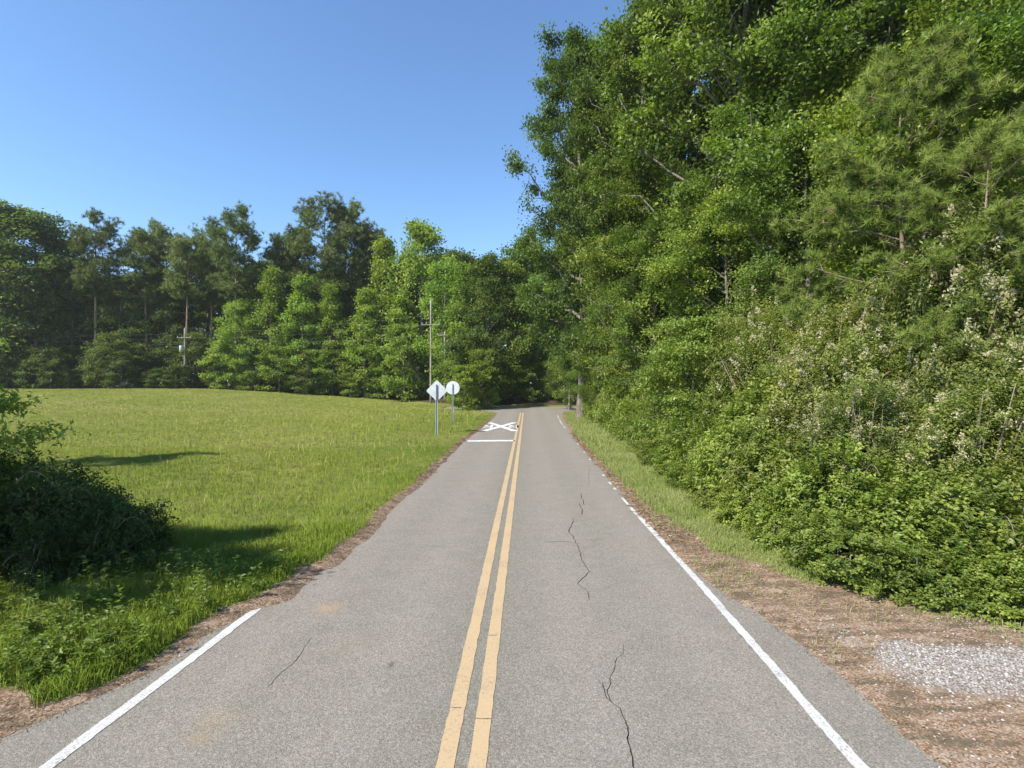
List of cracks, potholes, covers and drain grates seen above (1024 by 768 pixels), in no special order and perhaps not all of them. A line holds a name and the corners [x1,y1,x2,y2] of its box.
crack [602,645,635,768]
crack [552,467,599,601]
